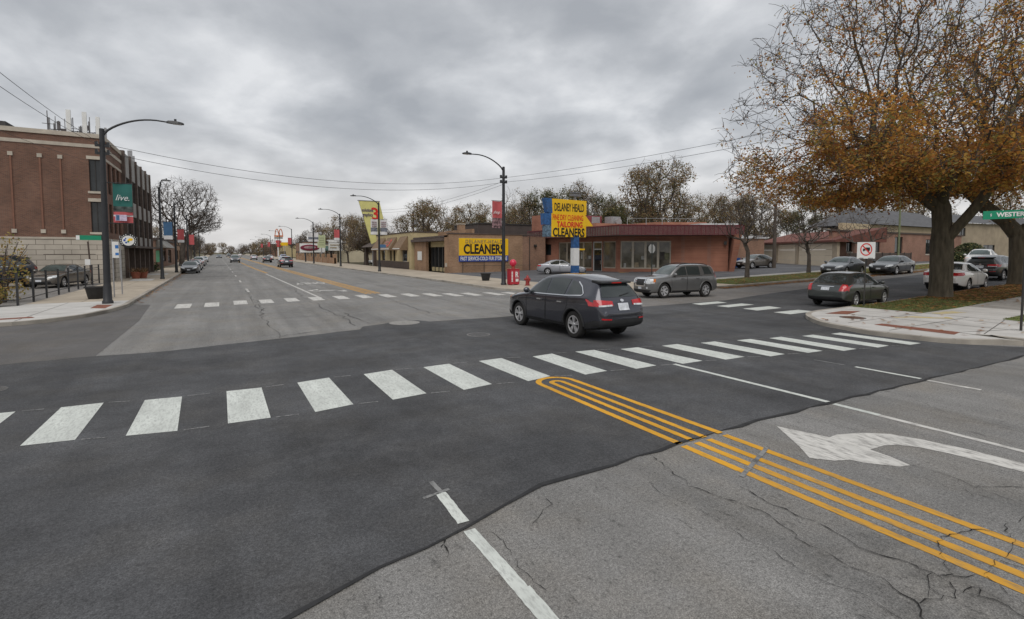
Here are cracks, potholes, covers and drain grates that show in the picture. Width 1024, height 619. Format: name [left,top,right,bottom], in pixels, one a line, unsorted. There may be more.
crack [248,289,368,335]
crack [653,457,1024,619]
